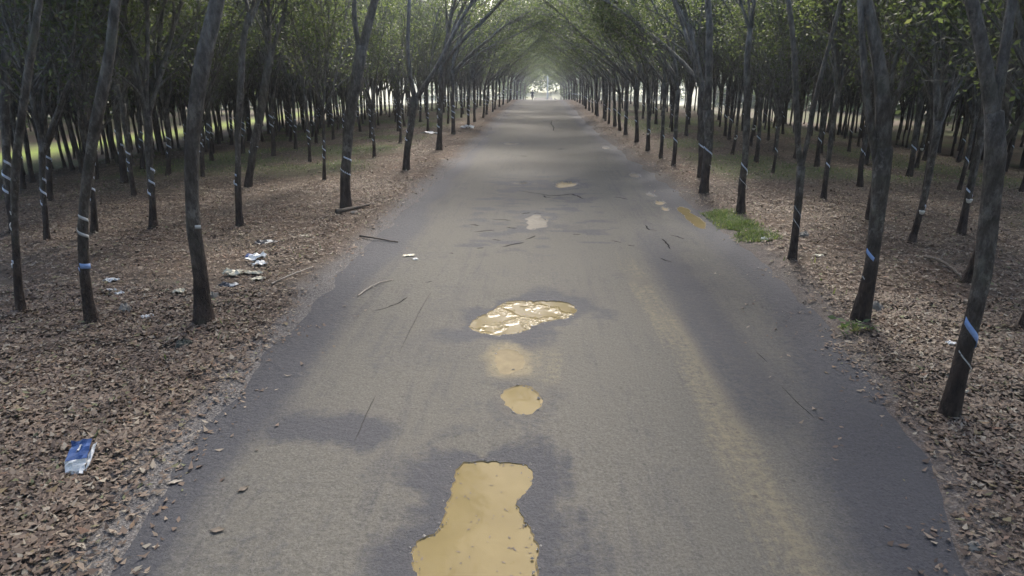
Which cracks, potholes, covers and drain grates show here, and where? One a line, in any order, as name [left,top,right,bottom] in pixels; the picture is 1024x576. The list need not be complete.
pothole [399,457,542,576]
pothole [468,299,577,337]
pothole [677,207,707,229]
pothole [501,384,543,415]
